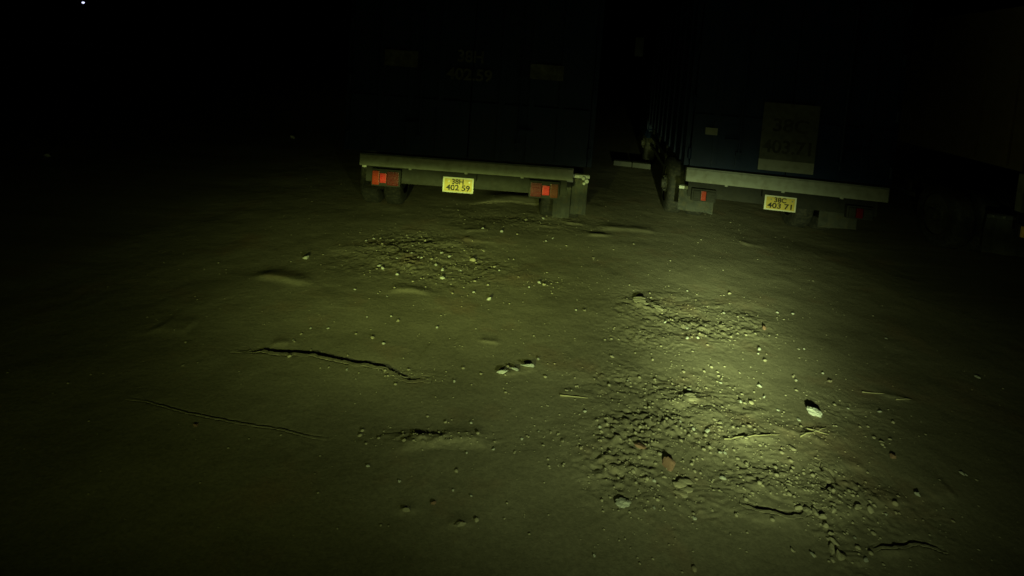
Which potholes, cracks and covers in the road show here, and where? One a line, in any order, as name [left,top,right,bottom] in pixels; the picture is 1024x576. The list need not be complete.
crack [126,346,433,440]
crack [740,458,836,519]
crack [868,541,948,554]
